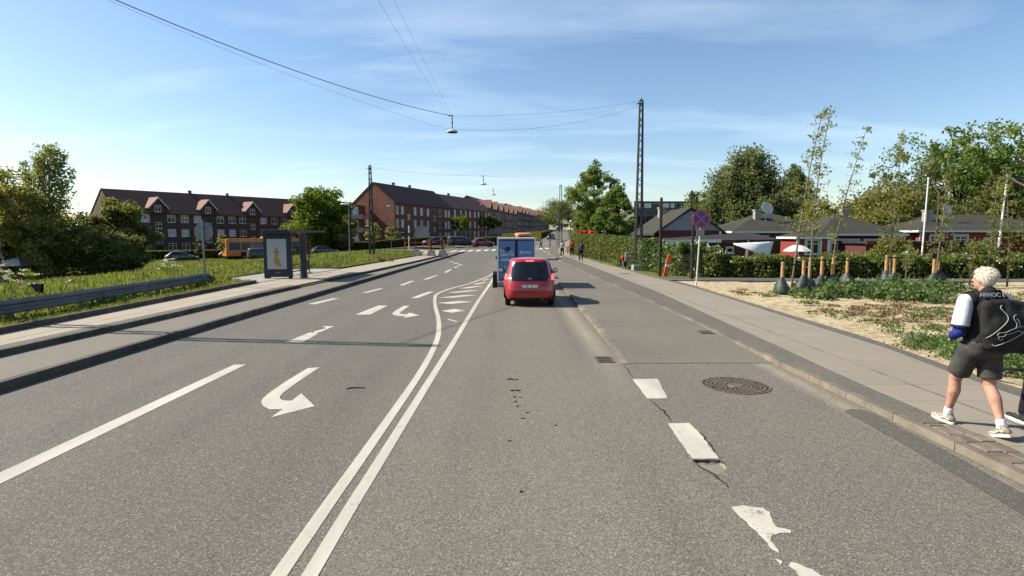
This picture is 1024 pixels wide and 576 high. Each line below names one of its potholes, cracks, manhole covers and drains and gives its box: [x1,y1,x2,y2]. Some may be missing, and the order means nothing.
manhole cover [701,377,772,395]
crack [693,432,729,488]
